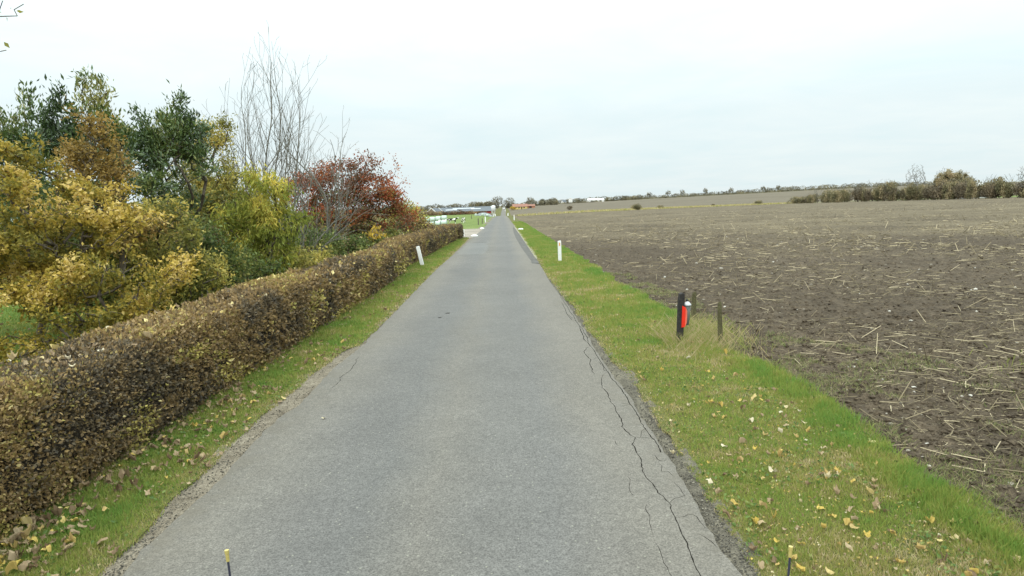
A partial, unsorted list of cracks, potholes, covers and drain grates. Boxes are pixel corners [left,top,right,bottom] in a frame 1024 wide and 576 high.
crack [561,298,715,576]
